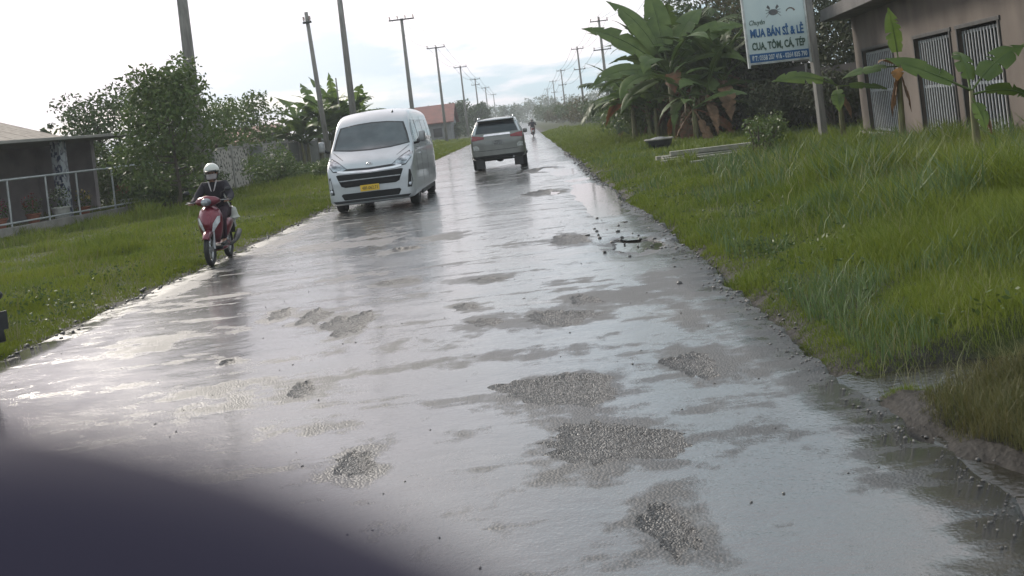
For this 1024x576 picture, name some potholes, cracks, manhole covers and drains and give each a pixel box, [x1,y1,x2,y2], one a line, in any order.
pothole [658,351,721,381]
pothole [487,372,619,408]
pothole [633,501,705,561]
pothole [523,310,608,327]
pothole [550,234,593,245]
pothole [536,420,693,467]
pothole [319,310,376,338]
pothole [332,449,377,478]
pothole [287,379,315,399]
pothole [267,307,292,321]
pothole [610,238,666,253]
